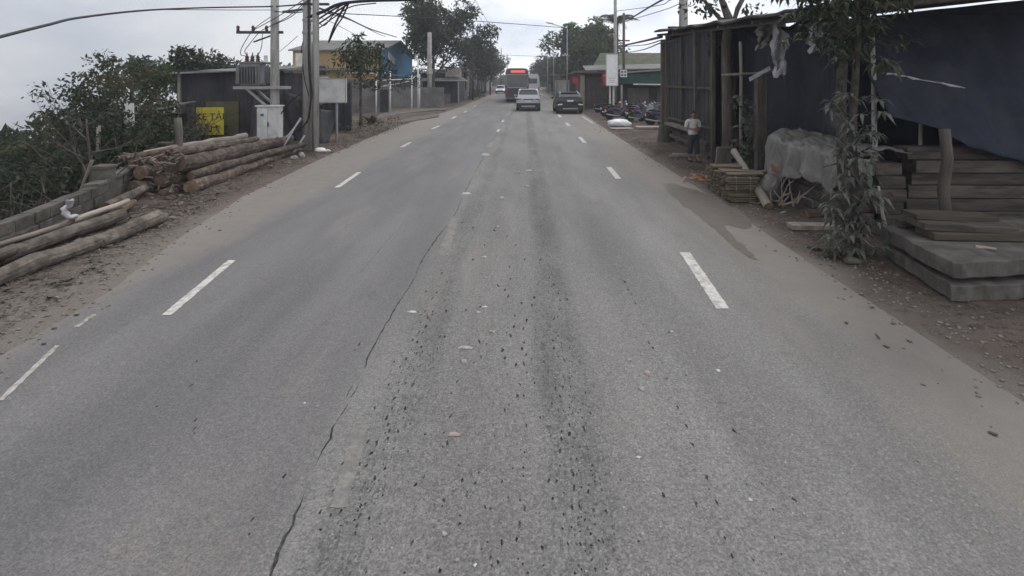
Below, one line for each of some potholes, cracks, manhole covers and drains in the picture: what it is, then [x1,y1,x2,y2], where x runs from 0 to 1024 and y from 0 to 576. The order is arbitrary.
crack [314,156,484,467]
